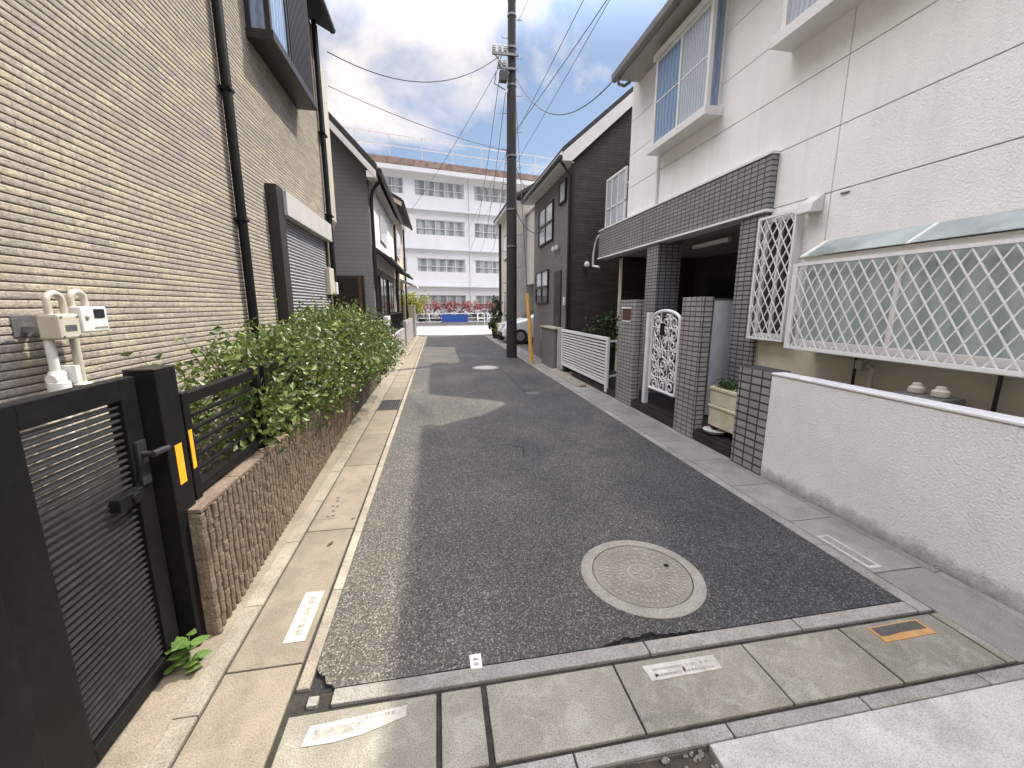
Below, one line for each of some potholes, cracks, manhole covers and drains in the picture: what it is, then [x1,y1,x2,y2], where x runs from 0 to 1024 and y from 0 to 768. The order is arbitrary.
drain grate [377,399,401,411]
manhole cover [581,540,707,619]
